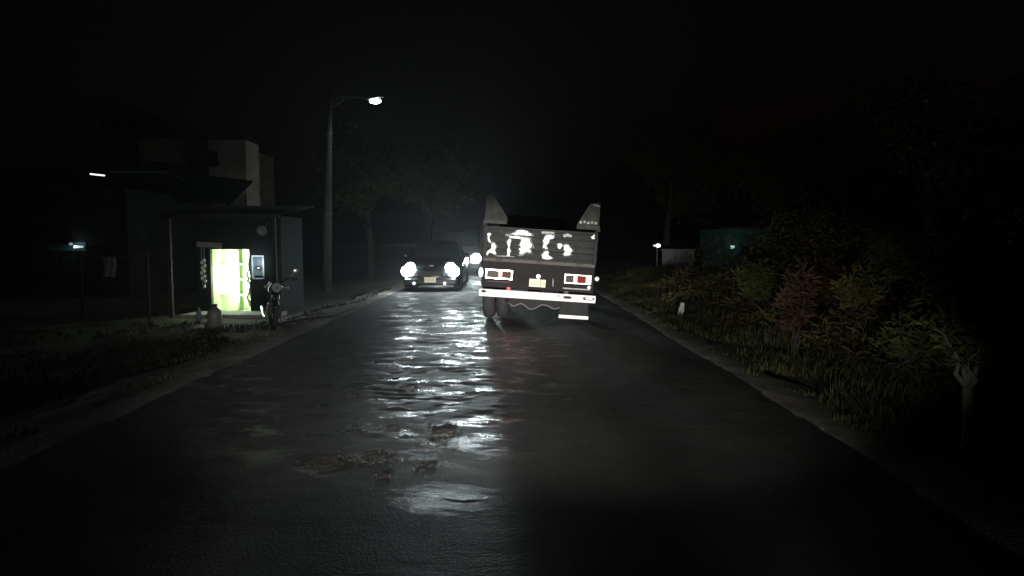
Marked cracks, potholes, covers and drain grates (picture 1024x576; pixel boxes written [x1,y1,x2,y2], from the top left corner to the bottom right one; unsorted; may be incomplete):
pothole [361,451,388,461]
pothole [294,456,346,475]
pothole [430,427,455,443]
